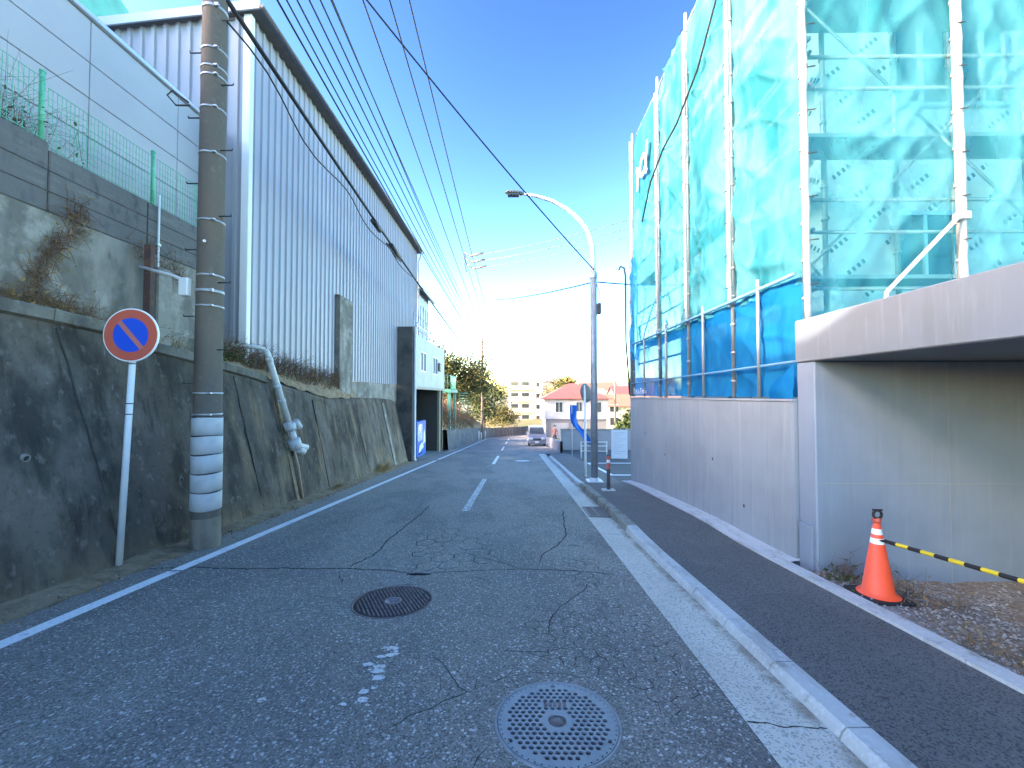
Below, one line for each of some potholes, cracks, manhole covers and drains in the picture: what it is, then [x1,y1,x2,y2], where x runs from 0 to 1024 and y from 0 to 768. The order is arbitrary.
crack [746,721,827,729]
manhole cover [350,585,433,619]
manhole cover [494,681,623,768]
drain grate [582,506,611,518]
crack [150,506,701,740]
